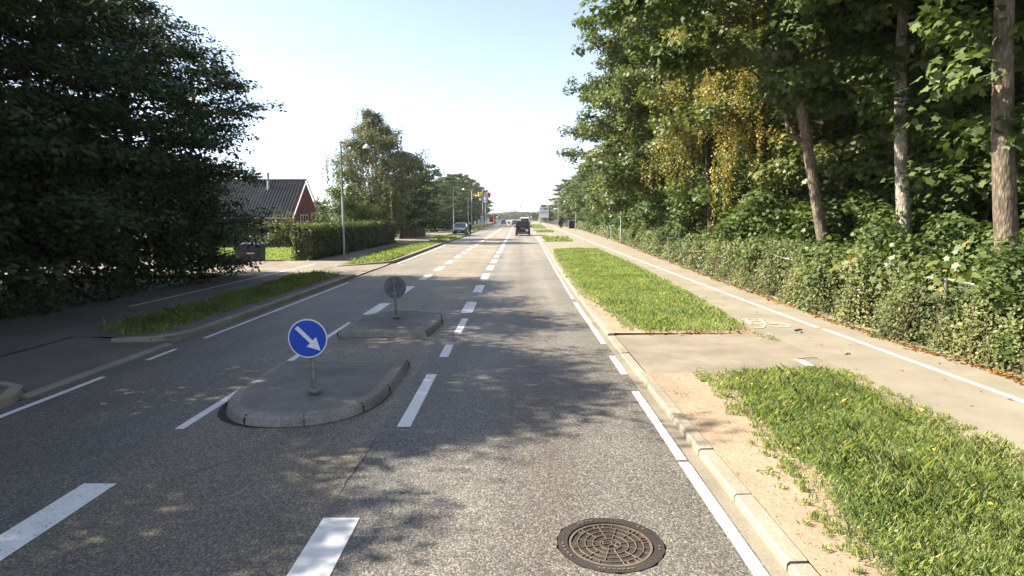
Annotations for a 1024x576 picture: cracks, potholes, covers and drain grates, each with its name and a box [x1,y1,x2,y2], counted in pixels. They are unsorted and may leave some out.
manhole cover [557,518,665,574]
